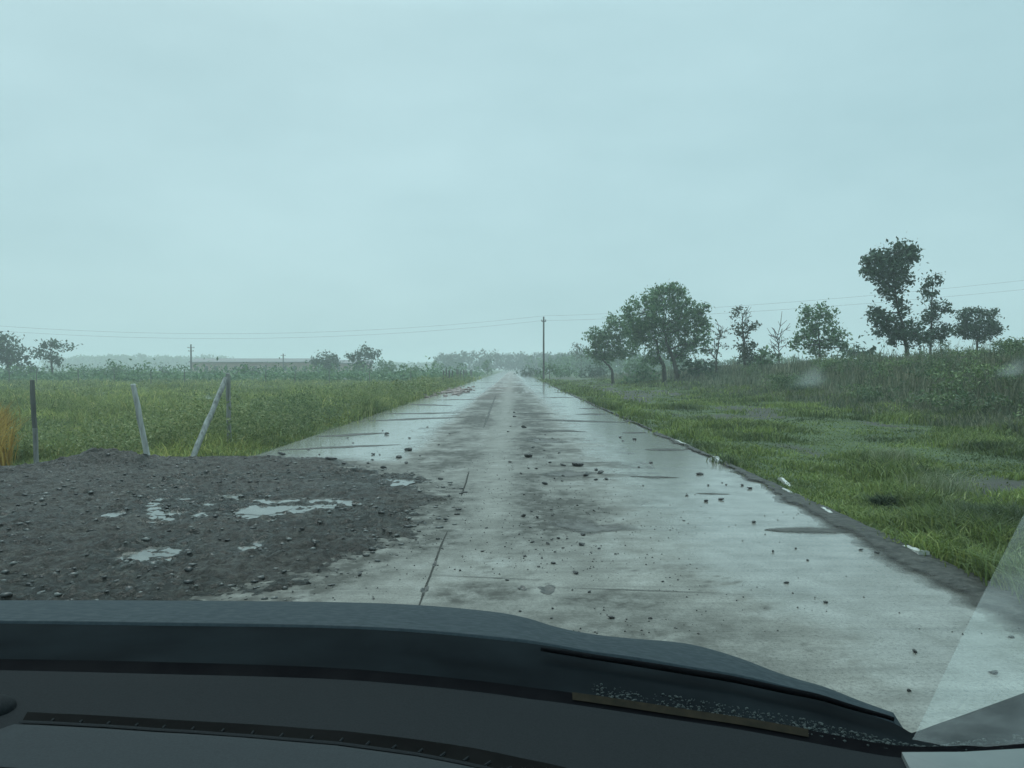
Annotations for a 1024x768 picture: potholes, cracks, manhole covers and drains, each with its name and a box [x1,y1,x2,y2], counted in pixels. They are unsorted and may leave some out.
pothole [538,585,555,594]
crack [419,532,536,605]
